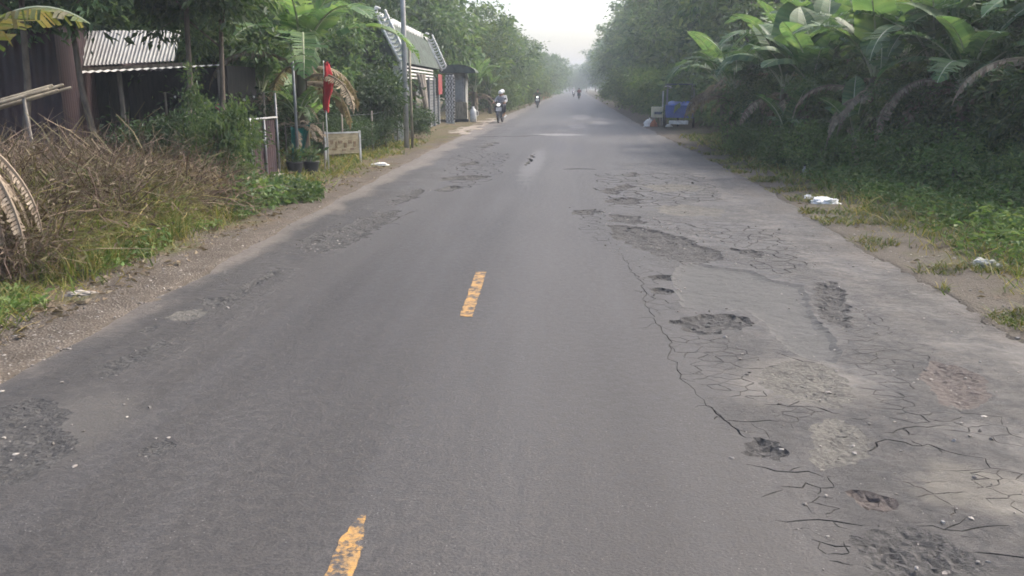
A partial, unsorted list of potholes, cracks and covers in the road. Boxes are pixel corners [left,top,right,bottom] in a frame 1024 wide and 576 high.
pothole [845,490,899,512]
pothole [848,526,990,576]
pothole [670,262,843,365]
pothole [741,437,790,462]
pothole [811,281,854,329]
pothole [606,225,724,263]
crack [578,172,1024,559]
